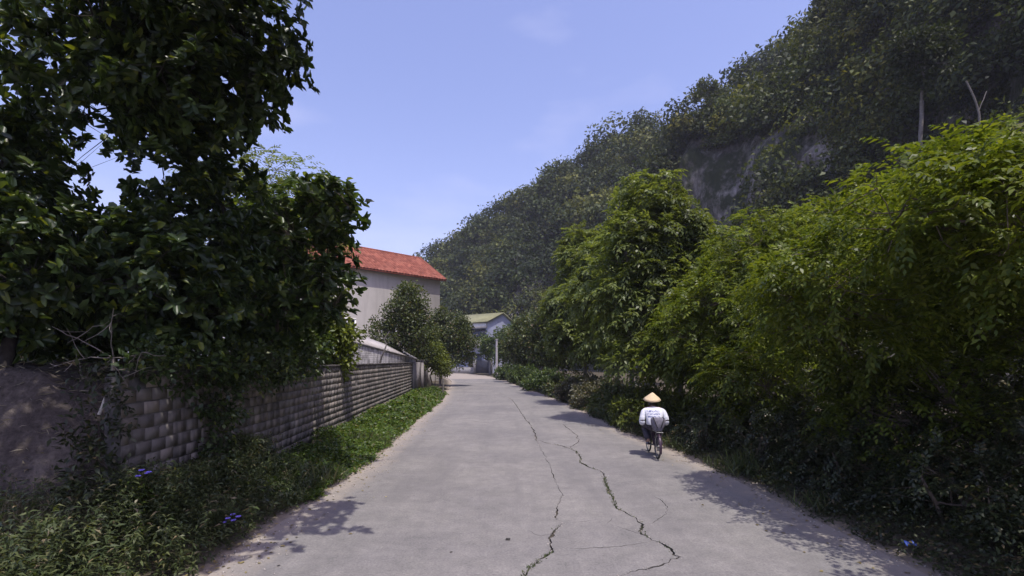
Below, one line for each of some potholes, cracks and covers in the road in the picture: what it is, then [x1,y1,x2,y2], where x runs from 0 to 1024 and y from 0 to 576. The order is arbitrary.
crack [509,398,590,576]
crack [536,425,680,576]
